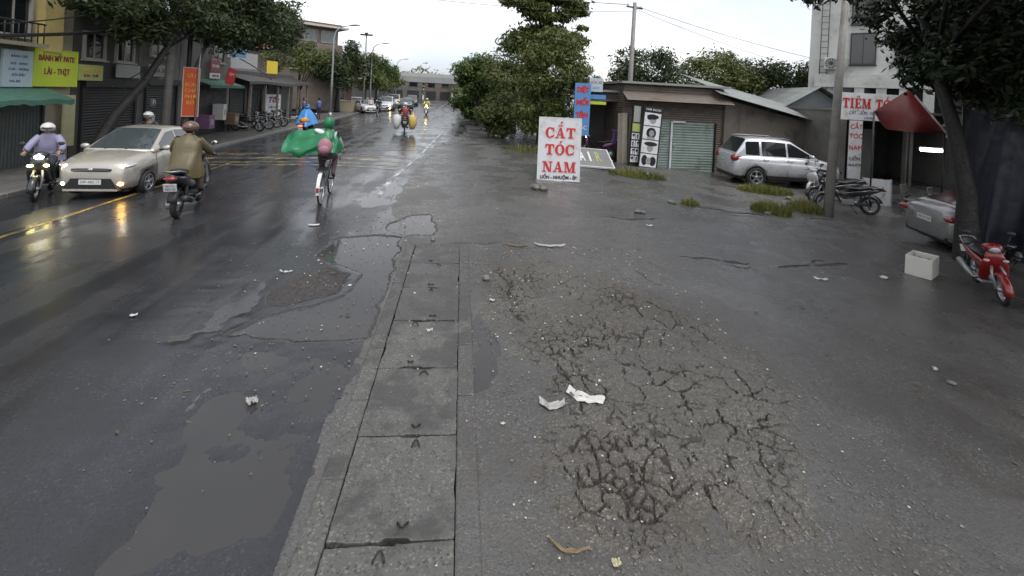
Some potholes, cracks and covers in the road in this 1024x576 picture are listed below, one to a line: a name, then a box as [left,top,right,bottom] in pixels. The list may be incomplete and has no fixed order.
crack [441,241,854,576]
